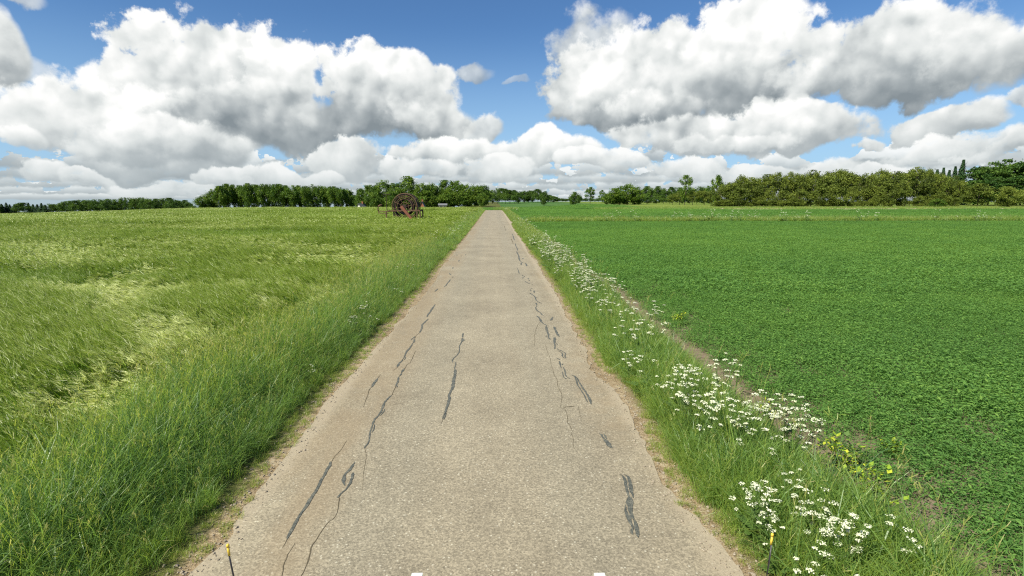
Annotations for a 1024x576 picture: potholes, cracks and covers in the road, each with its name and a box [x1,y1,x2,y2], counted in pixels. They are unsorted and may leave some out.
crack [534,322,580,447]
crack [281,462,355,576]
